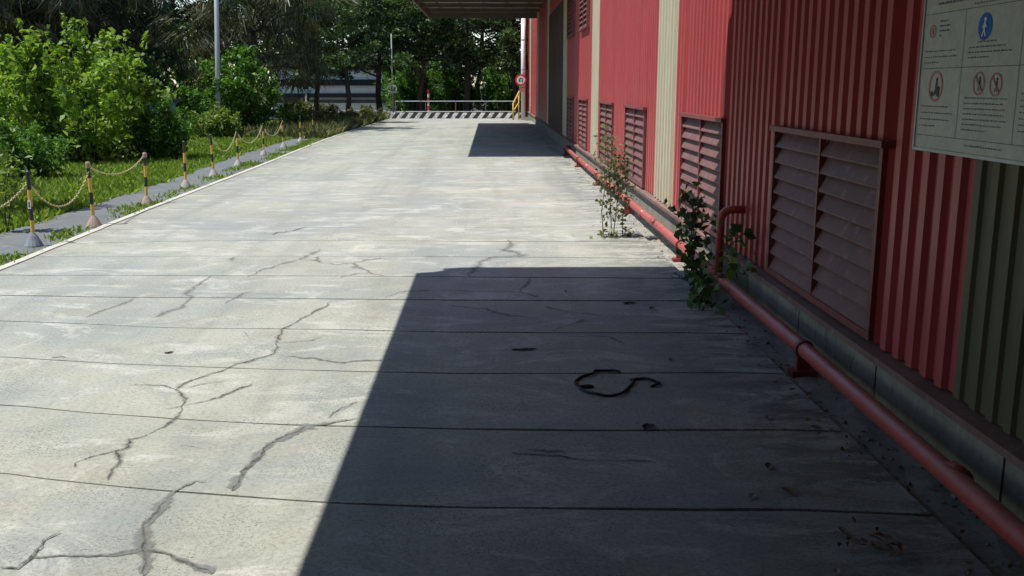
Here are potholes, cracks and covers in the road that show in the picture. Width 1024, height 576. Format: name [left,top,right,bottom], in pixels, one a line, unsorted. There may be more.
crack [226,249,384,303]
crack [156,276,210,317]
crack [513,449,651,462]
crack [0,305,357,575]
crack [386,242,624,344]
